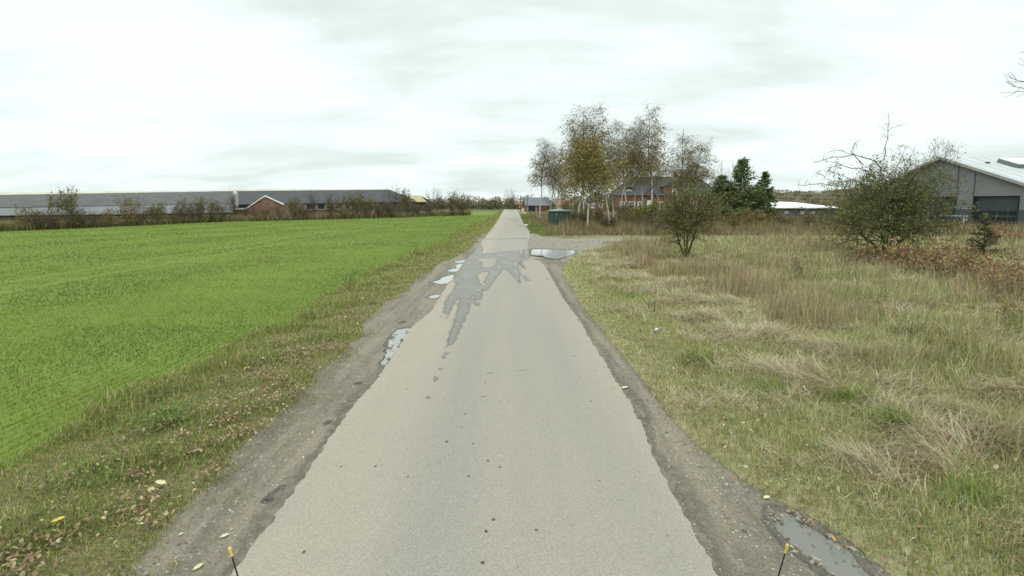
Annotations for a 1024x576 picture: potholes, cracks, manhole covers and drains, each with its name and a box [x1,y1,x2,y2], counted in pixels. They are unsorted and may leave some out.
pothole [761,505,880,576]
pothole [379,326,412,367]
pothole [529,248,578,260]
